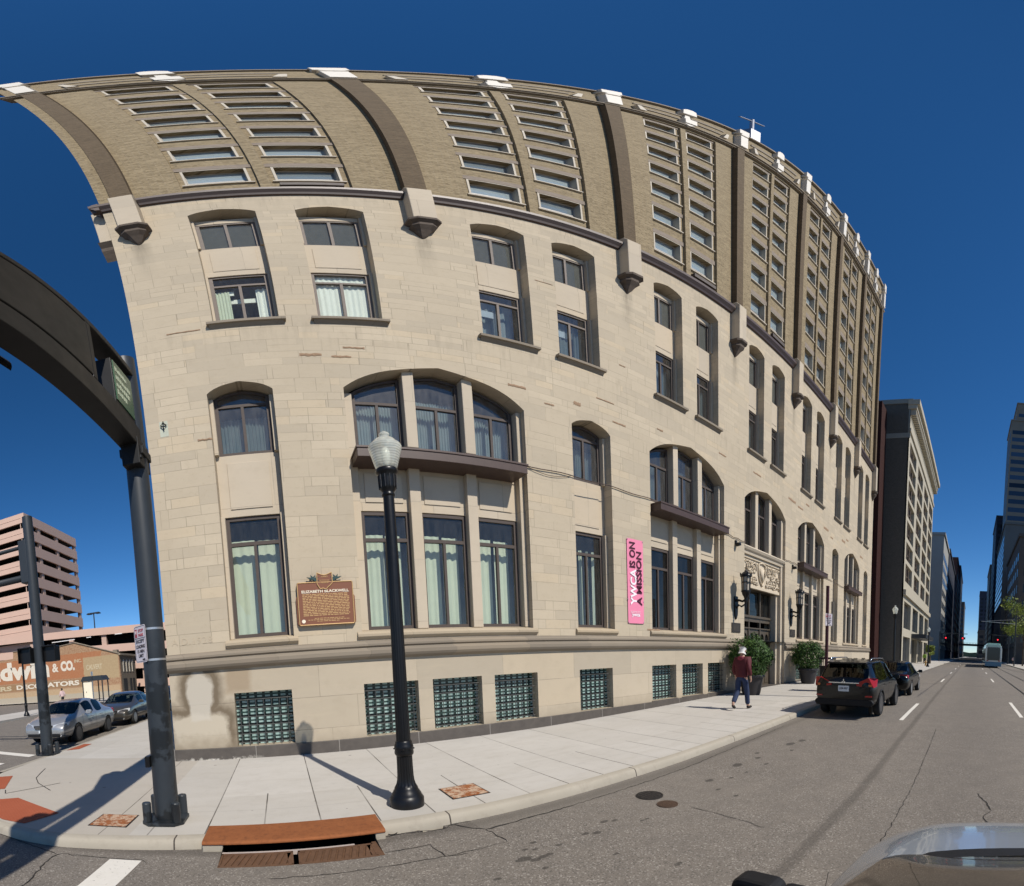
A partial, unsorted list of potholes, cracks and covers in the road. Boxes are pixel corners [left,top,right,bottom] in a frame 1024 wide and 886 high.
manhole cover [636,791,663,800]
utility cover [88,814,139,828]
manhole cover [657,800,678,808]
crack [880,732,935,841]
utility cover [439,783,491,800]
drain grate [202,814,386,868]
